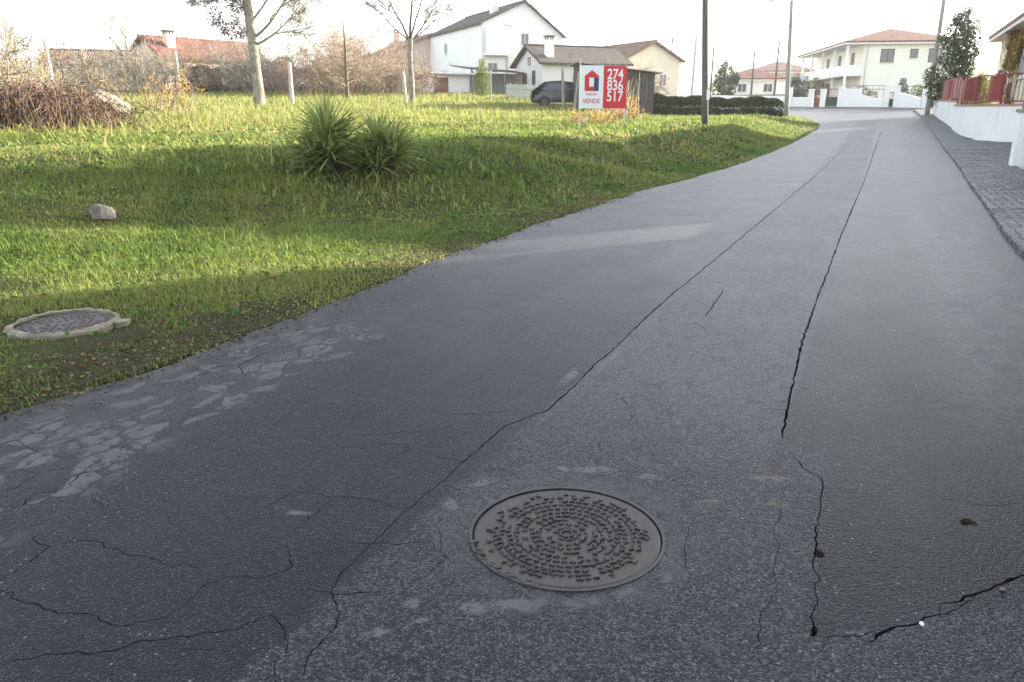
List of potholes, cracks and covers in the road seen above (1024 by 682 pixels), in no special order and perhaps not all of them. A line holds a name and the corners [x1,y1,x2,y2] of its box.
crack [752,485,783,667]
crack [1,535,293,682]
crack [202,334,316,383]
crack [0,421,139,508]
crack [663,510,723,587]
manhole cover [2,308,131,340]
crack [264,492,408,522]
crack [790,452,1024,643]
manhole cover [469,487,666,592]
